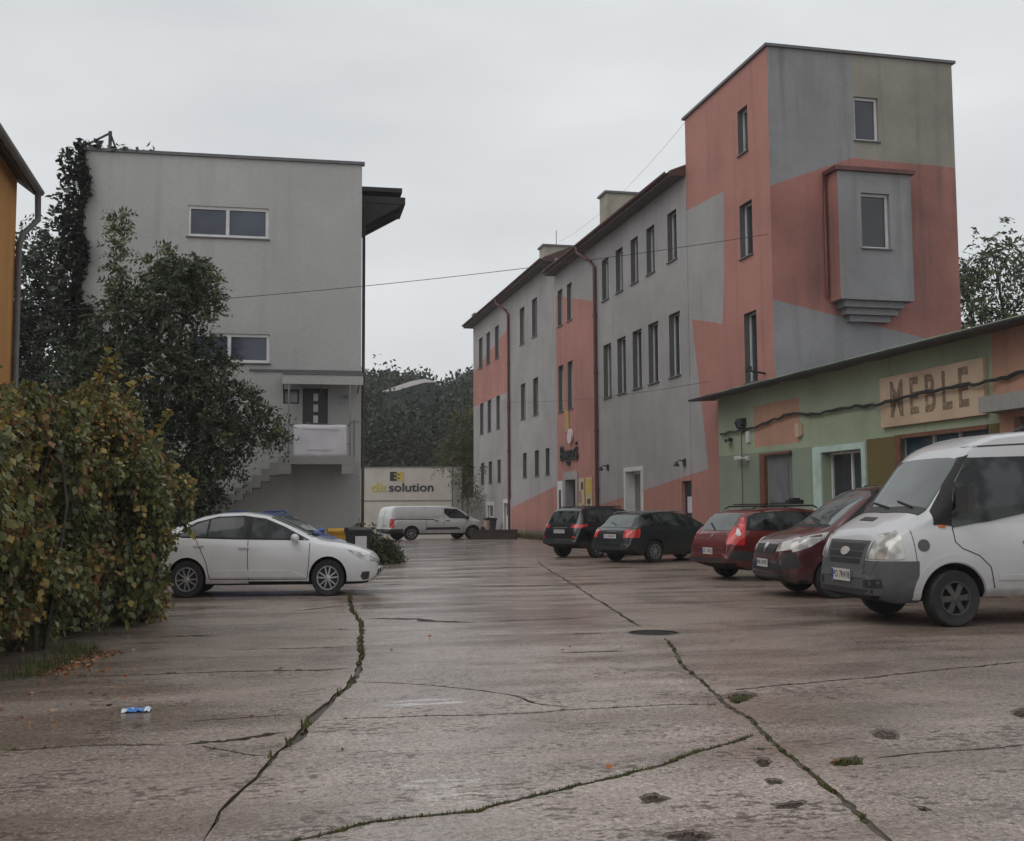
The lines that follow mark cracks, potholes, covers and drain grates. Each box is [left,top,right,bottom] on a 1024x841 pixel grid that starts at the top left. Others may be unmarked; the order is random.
pothole [1009,708,1024,718]
pothole [754,757,773,767]
crack [75,562,1022,841]
pothole [662,829,716,841]
pothole [770,800,807,809]
pothole [868,728,900,740]
pothole [639,792,672,804]
